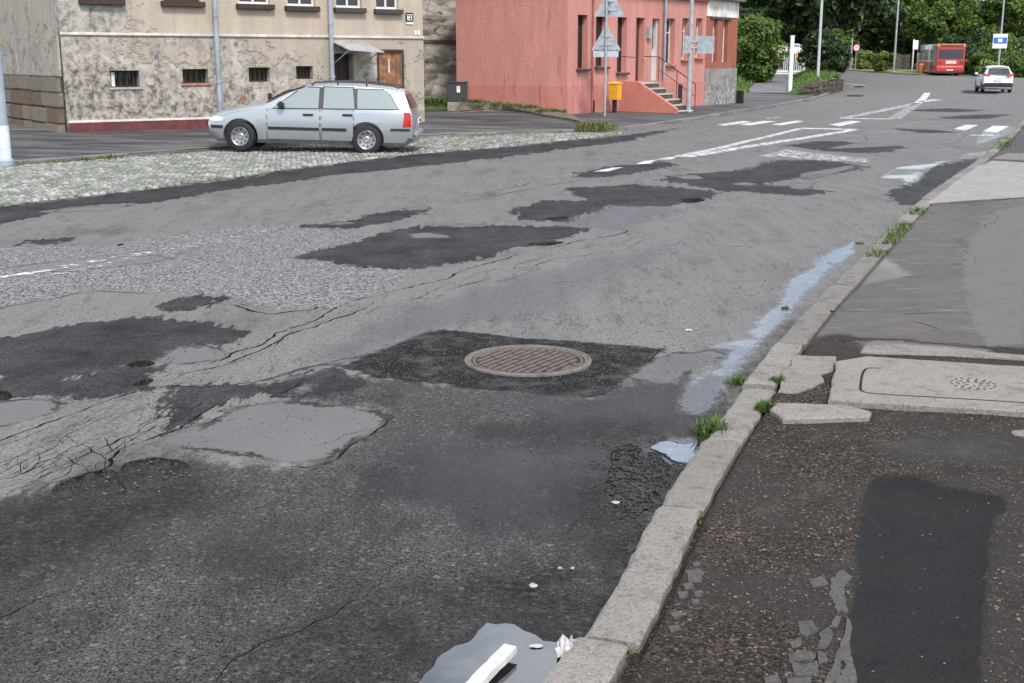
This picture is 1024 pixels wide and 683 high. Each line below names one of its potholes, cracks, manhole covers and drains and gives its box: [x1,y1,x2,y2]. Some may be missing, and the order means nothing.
crack [0,250,605,496]
pothole [120,457,191,493]
manhole cover [464,345,592,377]
pothole [52,469,127,505]
crack [549,228,682,254]
pothole [127,360,155,368]
pothole [604,444,672,523]
